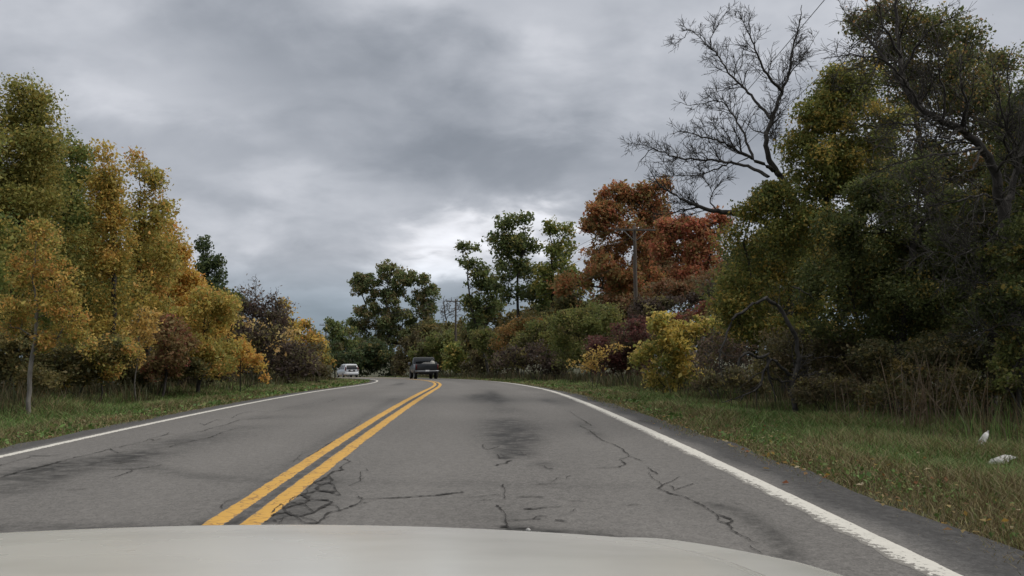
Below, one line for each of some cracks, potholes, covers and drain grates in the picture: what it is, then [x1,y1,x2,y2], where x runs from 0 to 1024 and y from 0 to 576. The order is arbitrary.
crack [266,459,582,533]
crack [571,412,640,468]
